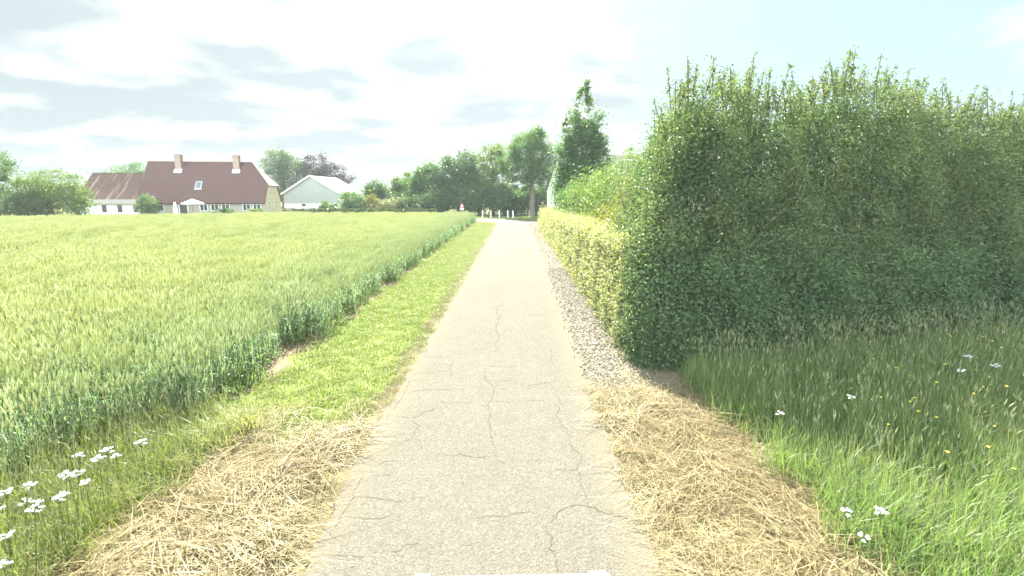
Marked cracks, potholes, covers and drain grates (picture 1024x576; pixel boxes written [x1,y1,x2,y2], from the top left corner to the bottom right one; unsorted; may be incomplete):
crack [332,479,414,530]
crack [530,380,639,570]
crack [396,356,457,448]
crack [448,298,510,463]
